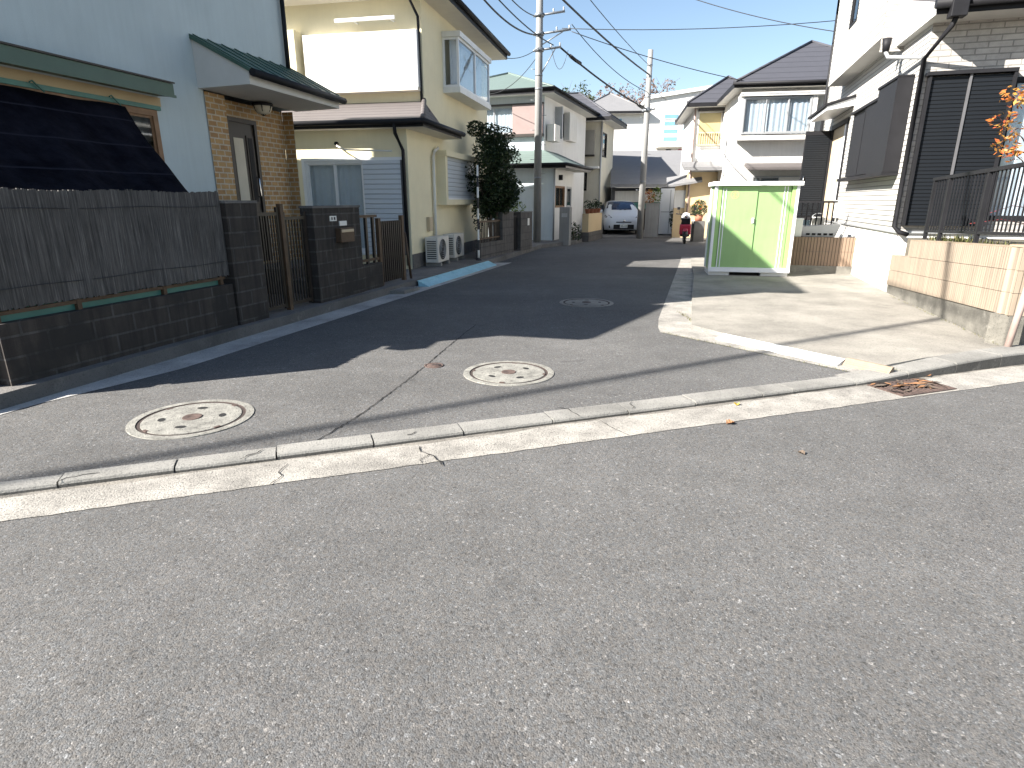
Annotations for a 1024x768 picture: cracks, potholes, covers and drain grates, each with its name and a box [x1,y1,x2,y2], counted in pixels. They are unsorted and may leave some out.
manhole cover [125,399,255,440]
manhole cover [463,361,554,386]
manhole cover [559,298,614,307]
drain grate [867,378,957,397]
